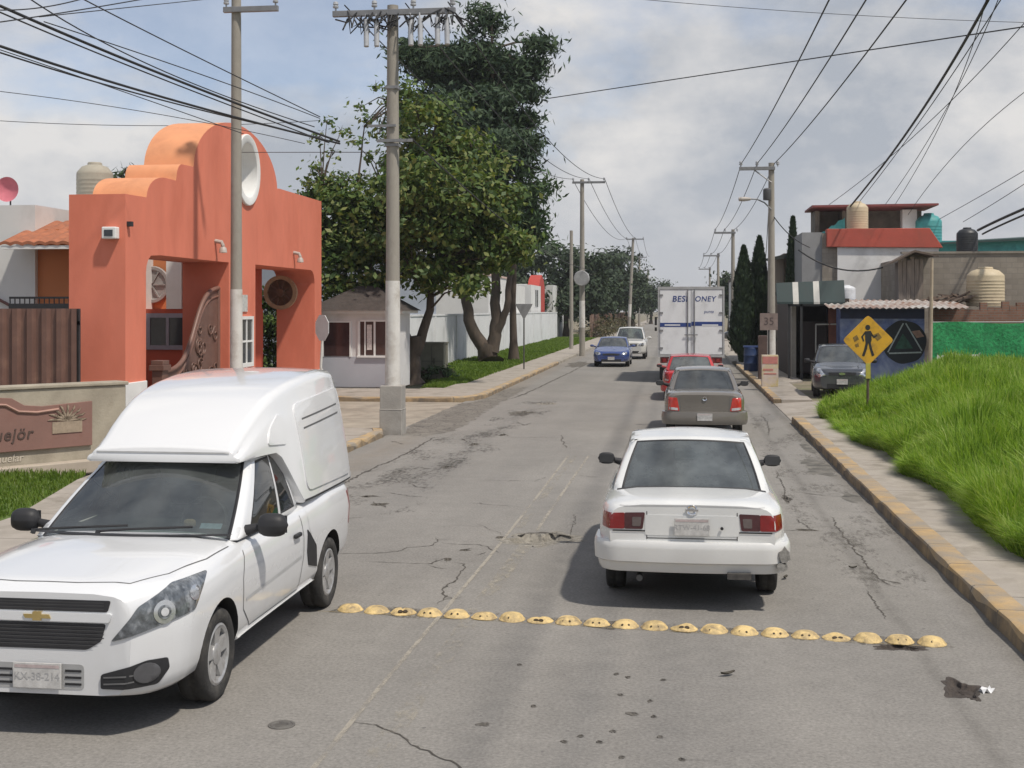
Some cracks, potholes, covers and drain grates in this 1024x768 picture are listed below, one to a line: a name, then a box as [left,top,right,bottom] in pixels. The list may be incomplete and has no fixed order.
manhole cover [268,720,295,730]
crack [357,722,462,768]
pothole [496,531,587,548]
crack [340,525,498,604]
crack [854,577,902,617]
